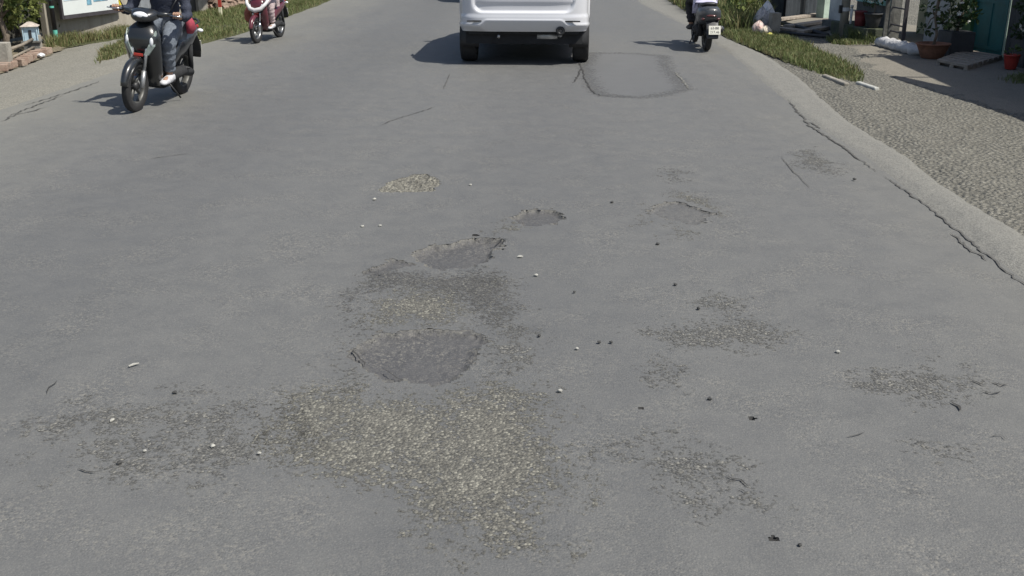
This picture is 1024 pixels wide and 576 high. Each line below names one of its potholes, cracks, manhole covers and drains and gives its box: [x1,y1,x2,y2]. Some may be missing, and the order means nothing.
crack [951,233,987,260]
pothole [508,208,566,226]
crack [2,81,99,121]
pothole [410,237,507,271]
pothole [645,201,717,225]
pothole [379,174,441,193]
pothole [346,328,495,392]
